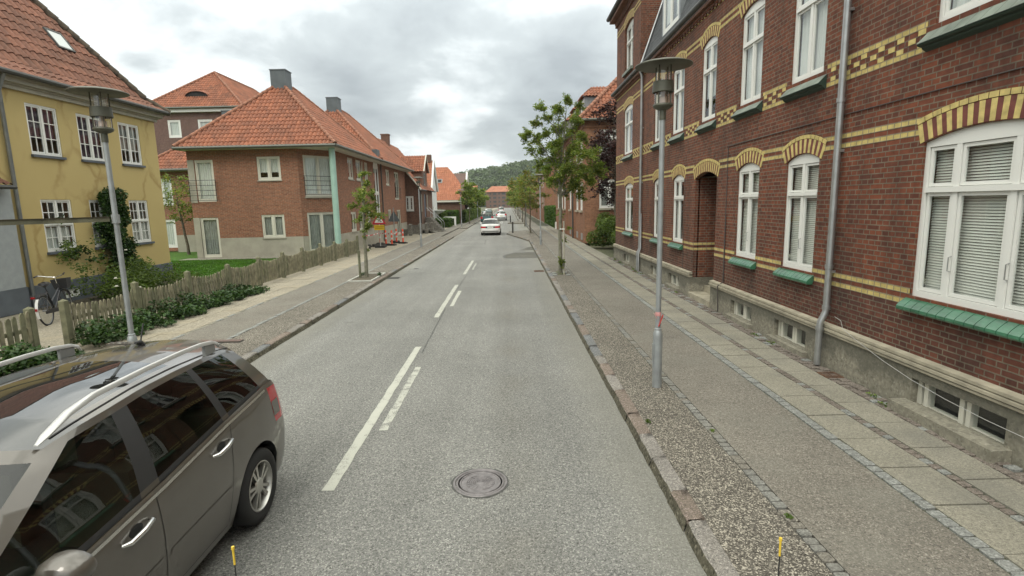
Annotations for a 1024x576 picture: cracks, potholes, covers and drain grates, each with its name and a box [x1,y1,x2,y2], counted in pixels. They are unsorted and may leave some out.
manhole cover [451,468,509,498]
